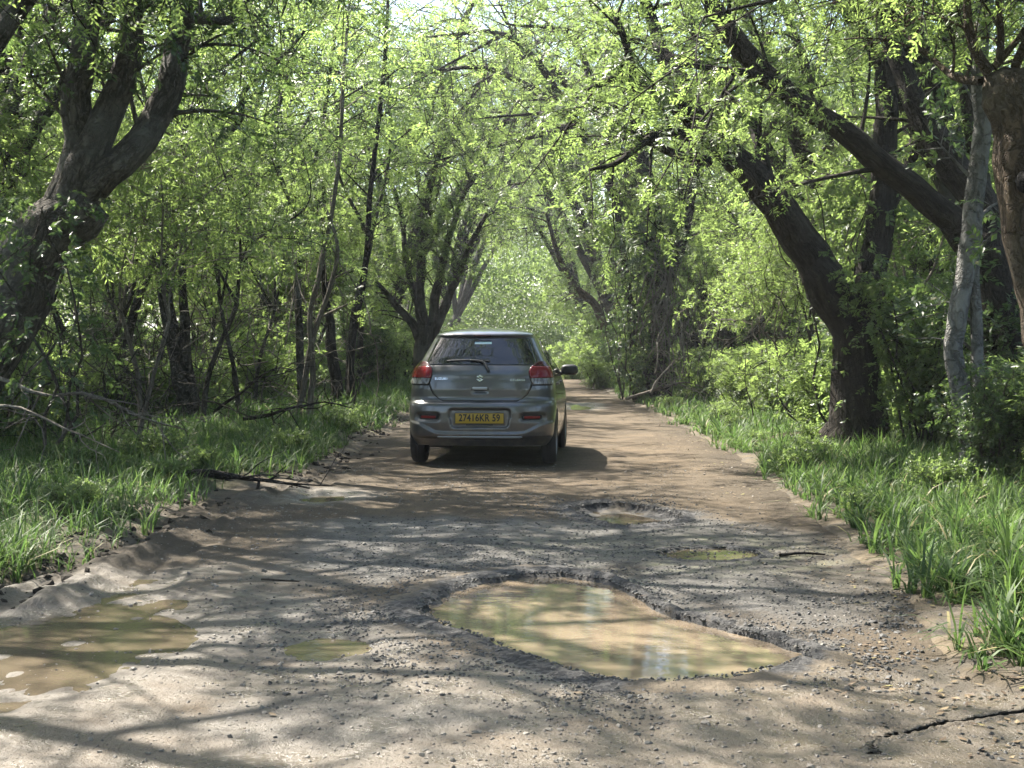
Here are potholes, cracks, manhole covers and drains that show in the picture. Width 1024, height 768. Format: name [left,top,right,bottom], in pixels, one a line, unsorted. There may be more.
crack [860,705,1024,755]
pothole [638,544,774,562]
pothole [380,564,857,694]
pothole [556,498,696,528]
